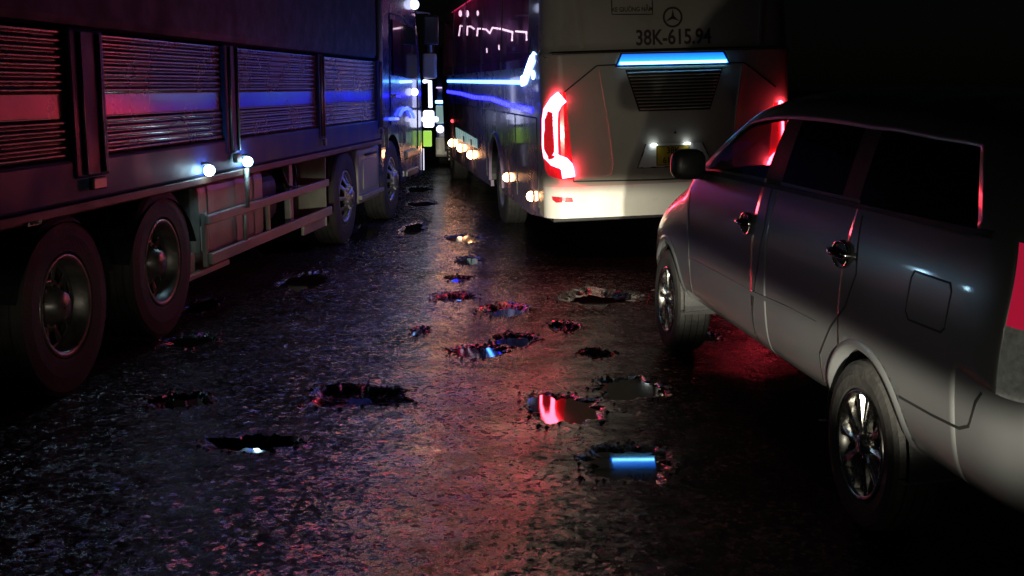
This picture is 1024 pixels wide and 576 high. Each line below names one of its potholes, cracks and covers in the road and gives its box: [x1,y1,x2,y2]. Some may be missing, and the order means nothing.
pothole [489,330,544,348]
pothole [547,285,650,307]
pothole [409,325,431,336]
pothole [404,199,439,207]
pothole [446,341,513,360]
pothole [271,269,335,292]
pothole [542,319,586,334]
pothole [152,329,222,349]
pothole [574,439,687,486]
pothole [576,347,619,359]
pothole [137,389,218,409]
pothole [455,254,485,265]
